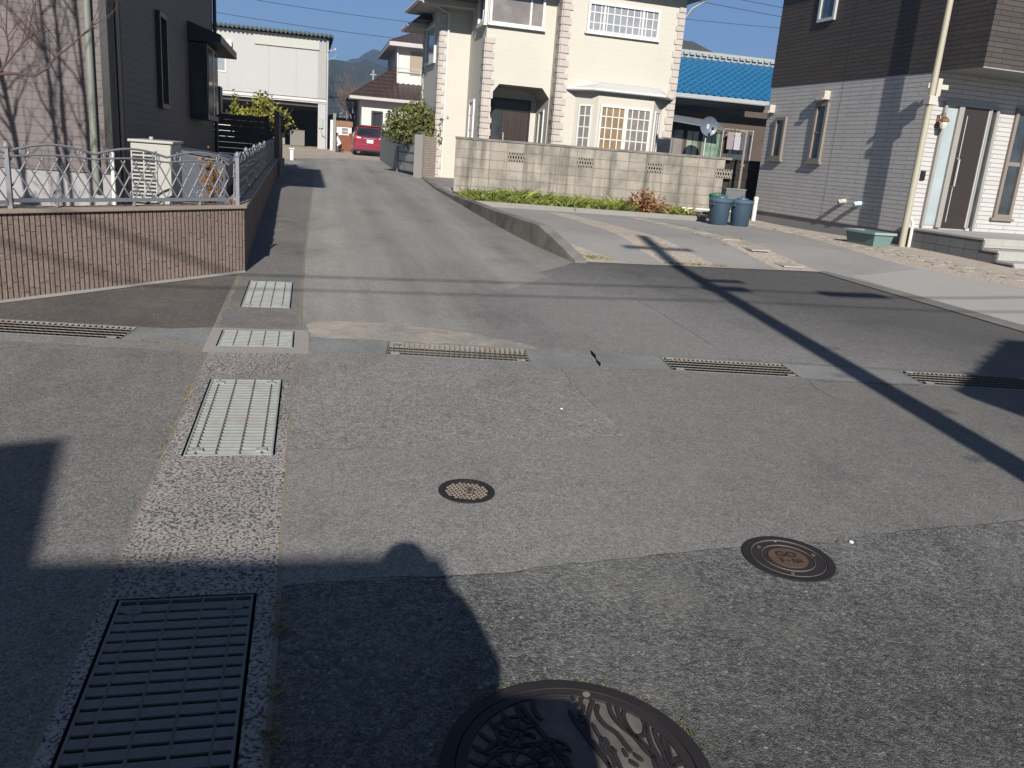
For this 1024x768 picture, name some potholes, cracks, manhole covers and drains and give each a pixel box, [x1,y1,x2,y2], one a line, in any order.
drain grate [661,357,800,377]
drain grate [386,341,529,362]
drain grate [0,319,137,339]
manhole cover [440,680,711,768]
drain grate [900,371,1024,390]
drain grate [183,379,281,456]
drain grate [217,330,293,347]
drain grate [241,280,292,308]
manhole cover [741,536,836,582]
manhole cover [438,479,495,504]
drain grate [54,594,254,768]
